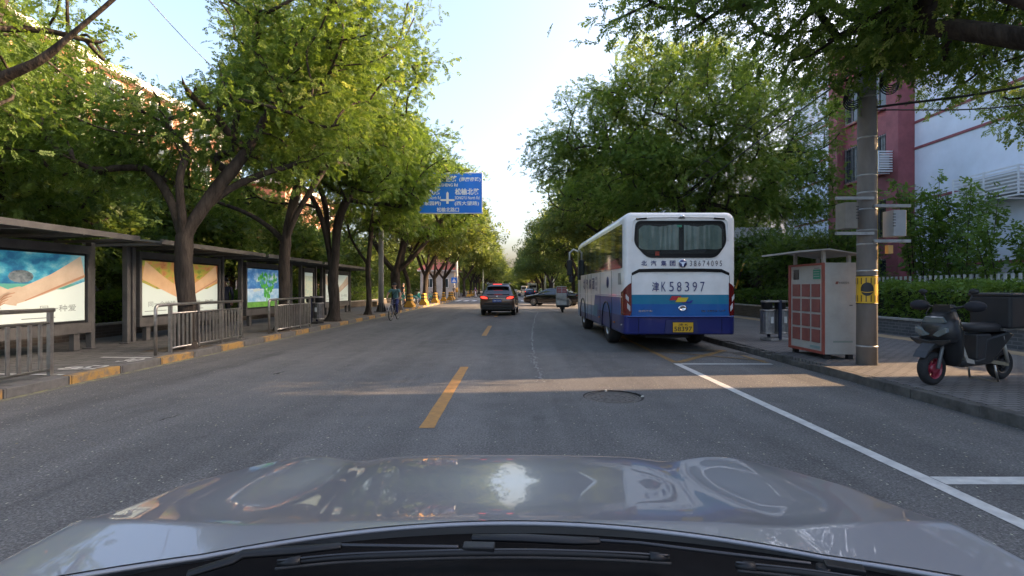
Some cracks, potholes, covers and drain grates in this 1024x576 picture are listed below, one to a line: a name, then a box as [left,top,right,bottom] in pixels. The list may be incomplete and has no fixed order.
crack [530,314,545,382]
manhole cover [583,389,644,403]
